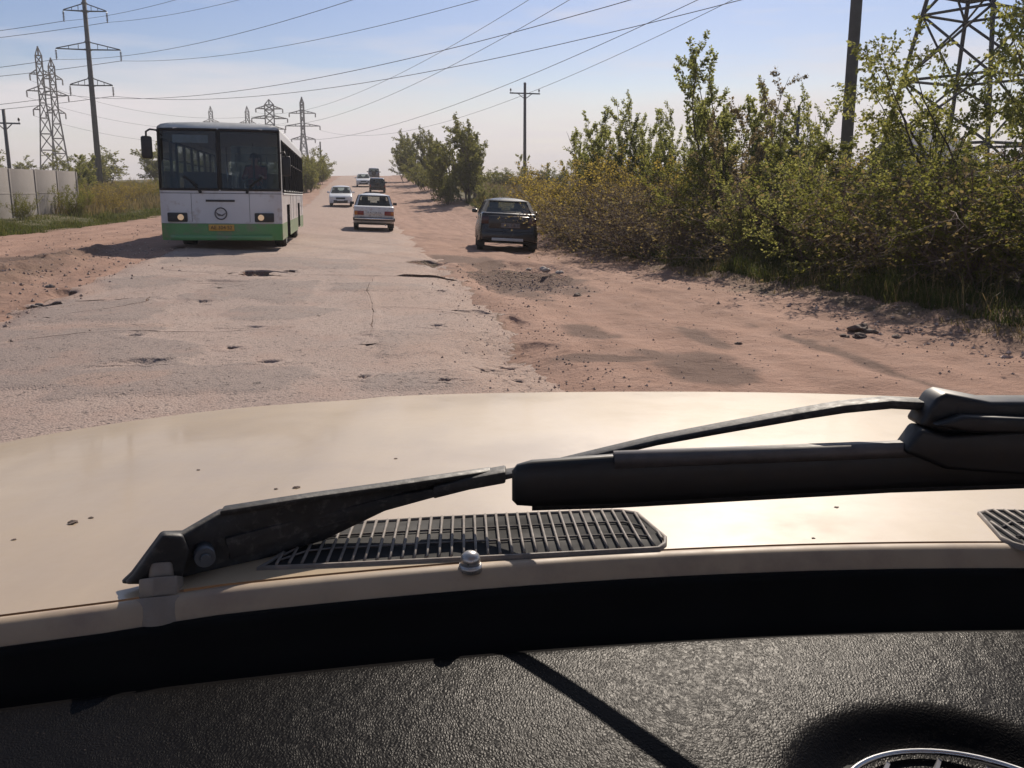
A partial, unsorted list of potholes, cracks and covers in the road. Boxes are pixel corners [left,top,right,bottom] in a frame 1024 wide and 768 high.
crack [146,268,468,345]
pothole [228,269,300,277]
pothole [233,357,300,366]
pothole [91,356,194,367]
pothole [397,260,460,270]
pothole [269,268,309,276]
